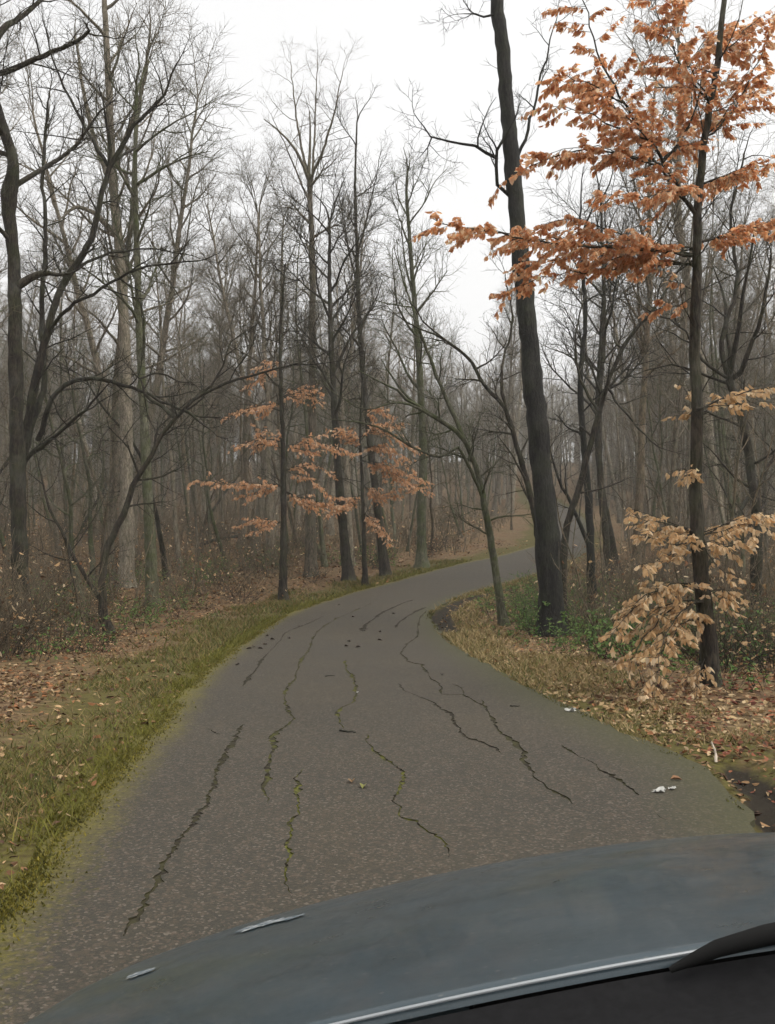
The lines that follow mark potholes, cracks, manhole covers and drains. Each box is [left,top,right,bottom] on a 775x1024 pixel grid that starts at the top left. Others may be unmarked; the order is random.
crack [123,725,243,936]
crack [243,600,647,896]
